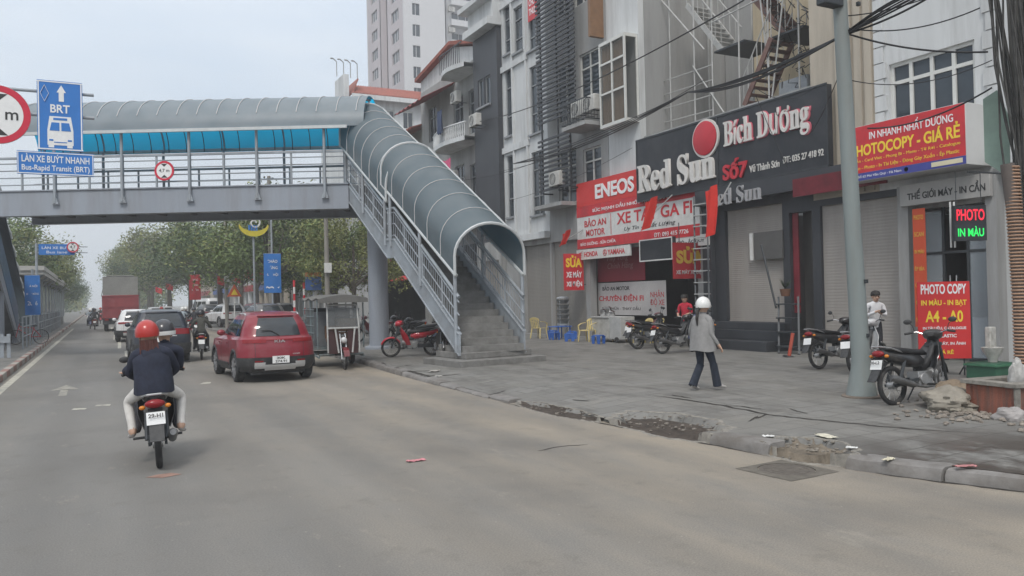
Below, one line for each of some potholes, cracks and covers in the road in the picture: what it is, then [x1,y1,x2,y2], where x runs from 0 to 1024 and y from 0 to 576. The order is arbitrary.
crack [650,394,969,433]
pothole [605,410,738,443]
manhole cover [735,460,839,481]
pothole [759,435,863,468]
